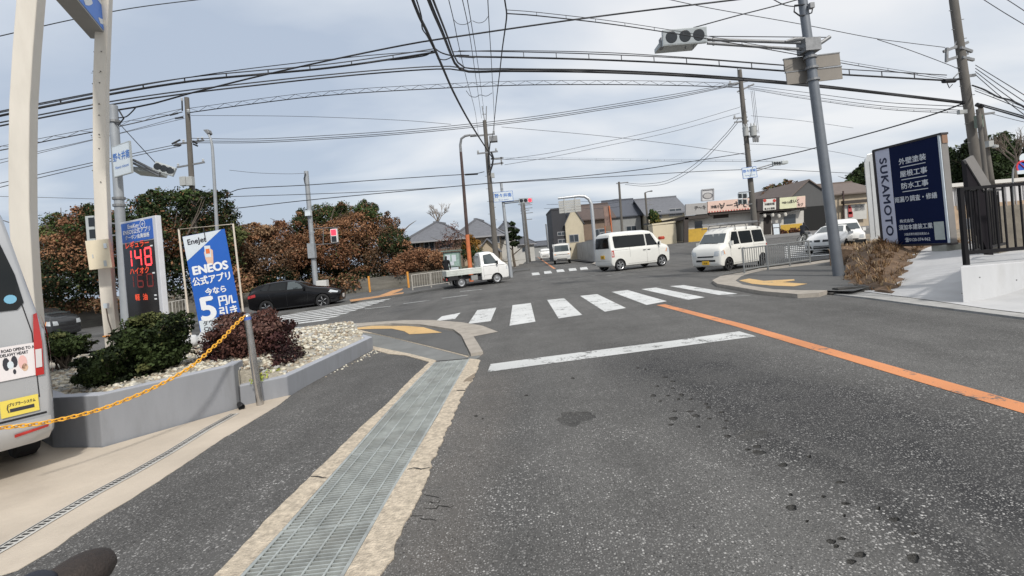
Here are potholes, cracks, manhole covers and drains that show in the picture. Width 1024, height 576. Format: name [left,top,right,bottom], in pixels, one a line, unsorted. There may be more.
drain grate [416,359,469,382]
drain grate [388,378,458,411]
drain grate [282,447,418,531]
crack [412,494,454,521]
drain grate [240,521,375,576]
drain grate [350,405,443,454]
